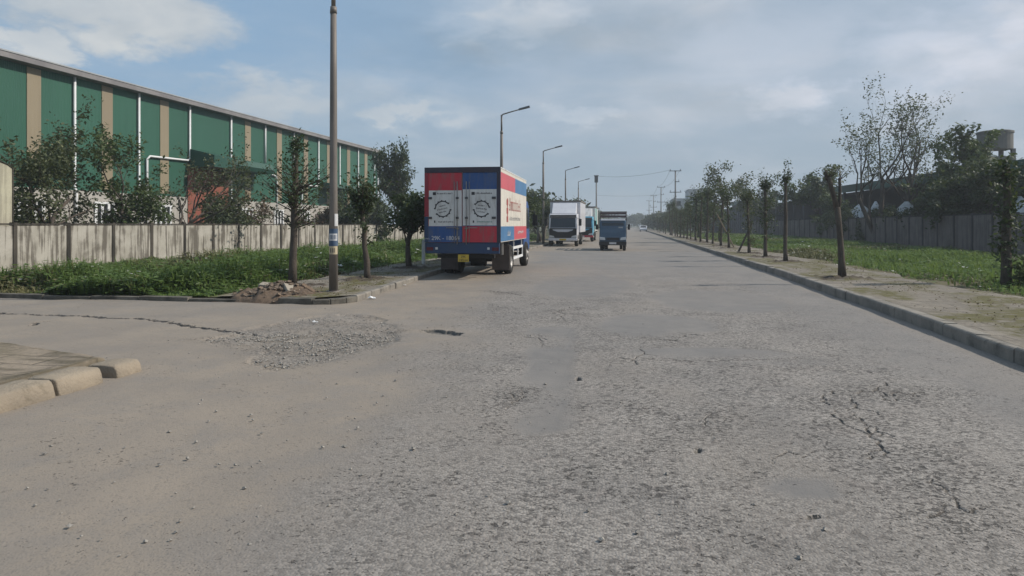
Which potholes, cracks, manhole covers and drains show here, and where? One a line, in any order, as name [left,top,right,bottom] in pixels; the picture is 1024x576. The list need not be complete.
crack [0,313,258,336]
crack [927,479,986,519]
crack [821,382,935,461]
